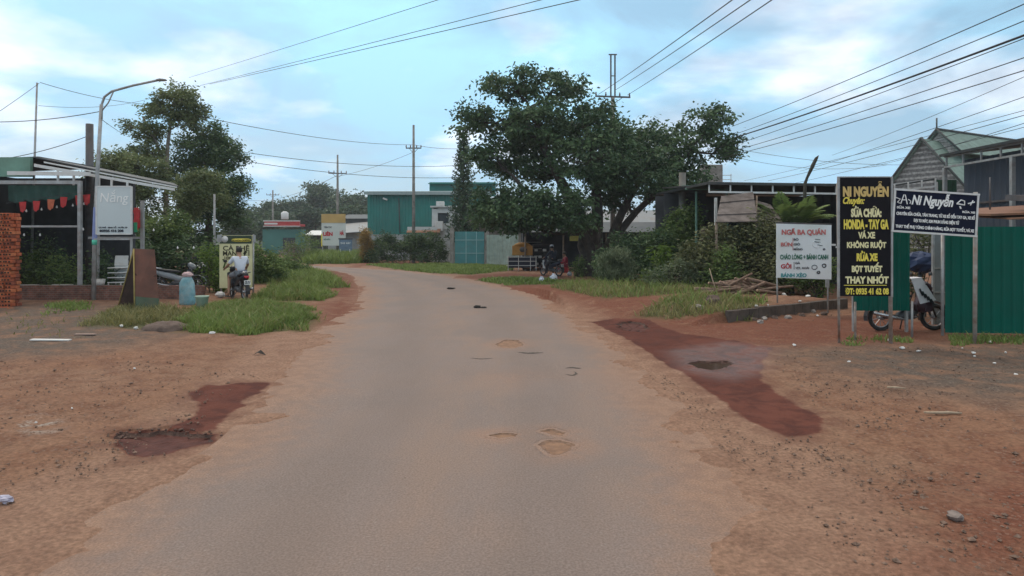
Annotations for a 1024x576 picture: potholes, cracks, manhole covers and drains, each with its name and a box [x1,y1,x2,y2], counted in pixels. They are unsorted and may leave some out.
pothole [109,428,223,457]
pothole [684,360,734,371]
pothole [485,432,522,440]
pothole [533,438,579,458]
pothole [493,340,526,349]
pothole [536,428,569,437]
pothole [611,321,654,333]
